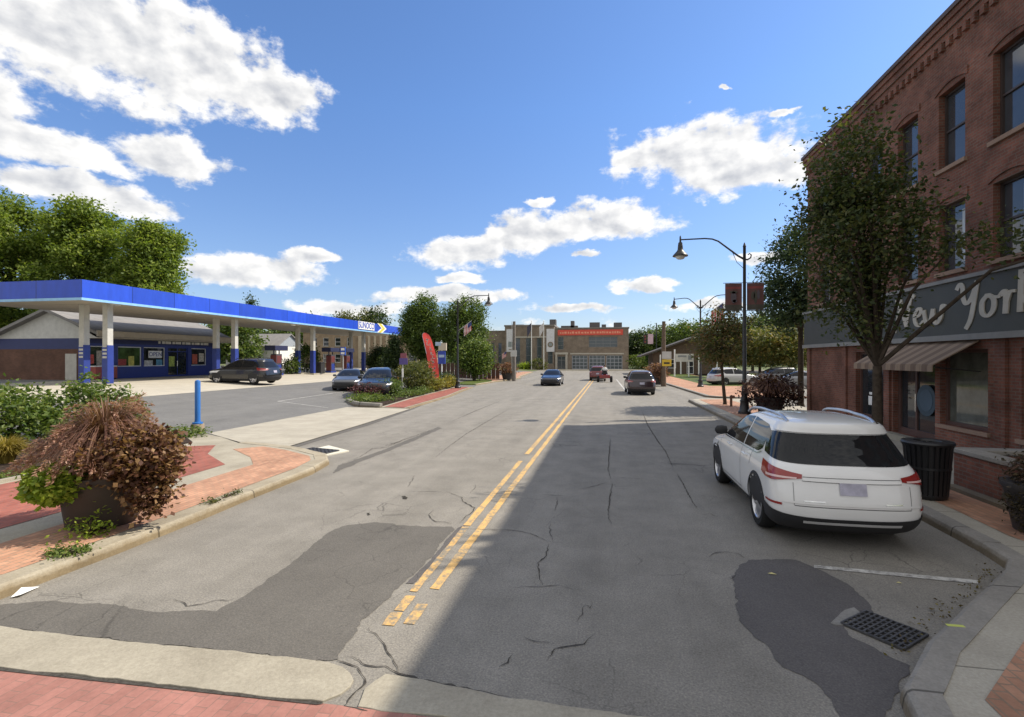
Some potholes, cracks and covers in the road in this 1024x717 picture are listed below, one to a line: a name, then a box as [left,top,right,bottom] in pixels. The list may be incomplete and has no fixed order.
drain grate [307,445,349,456]
crack [337,630,501,696]
crack [502,637,590,665]
drain grate [841,610,929,651]
crack [582,446,642,523]
crack [428,485,591,619]
